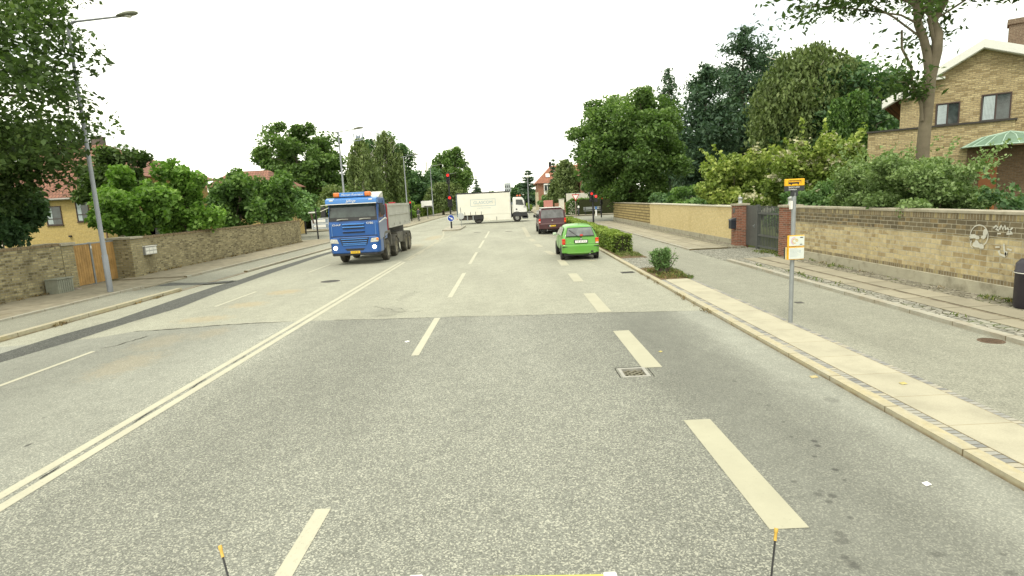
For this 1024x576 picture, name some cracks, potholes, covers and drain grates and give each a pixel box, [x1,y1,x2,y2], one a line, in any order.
drain grate [615,367,654,378]
